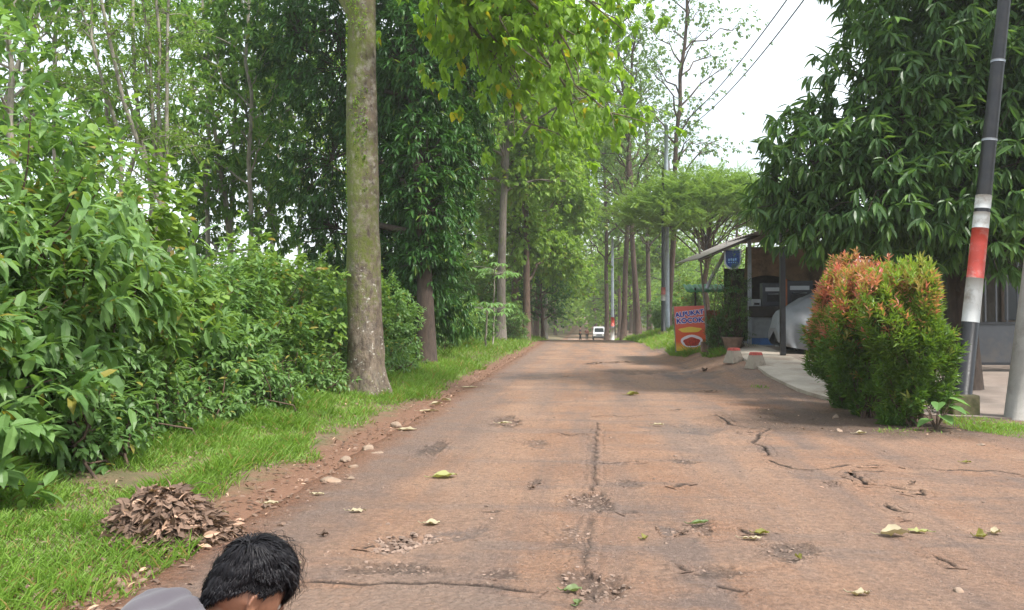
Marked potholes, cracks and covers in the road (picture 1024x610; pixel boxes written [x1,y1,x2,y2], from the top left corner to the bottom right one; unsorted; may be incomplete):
pothole [752,540,835,568]
pothole [553,488,622,520]
pothole [543,562,643,610]
pothole [655,525,681,539]
crack [709,414,1024,522]
pothole [480,412,529,431]
pothole [406,437,456,461]
crack [921,554,969,570]
pothole [682,516,719,540]
pothole [357,530,452,558]
